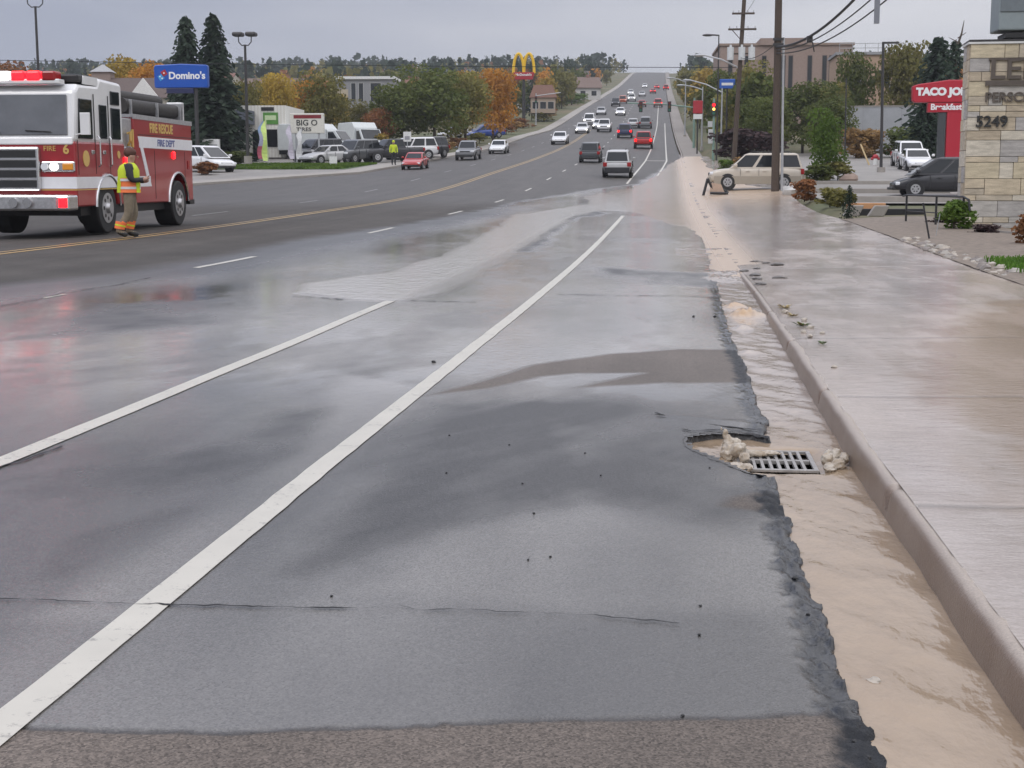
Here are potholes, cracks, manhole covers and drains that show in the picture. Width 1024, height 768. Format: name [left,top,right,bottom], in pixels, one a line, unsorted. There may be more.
pothole [683,431,771,477]
drain grate [748,450,819,474]
crack [0,598,678,623]
